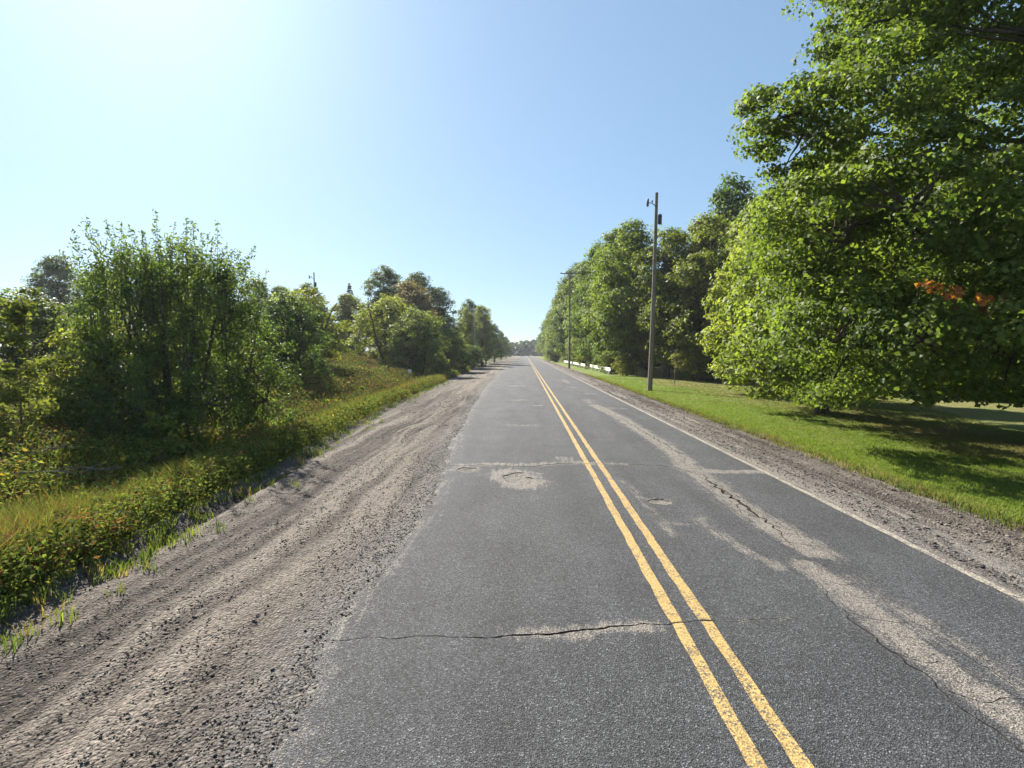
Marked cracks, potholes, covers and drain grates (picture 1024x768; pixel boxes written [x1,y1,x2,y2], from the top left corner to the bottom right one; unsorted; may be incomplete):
pothole [503,472,535,484]
crack [329,618,804,641]
crack [450,411,813,567]
crack [793,565,1024,753]
